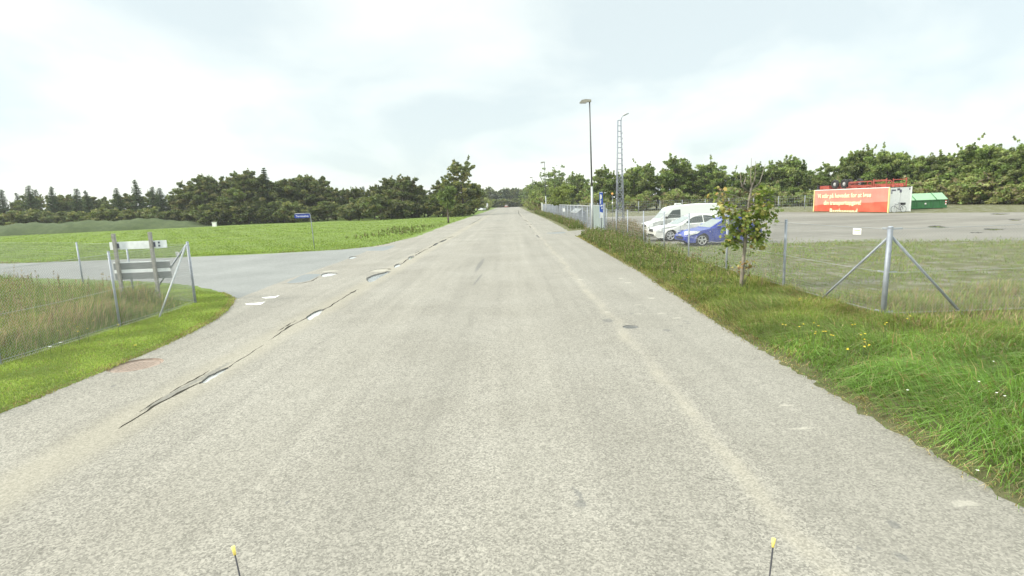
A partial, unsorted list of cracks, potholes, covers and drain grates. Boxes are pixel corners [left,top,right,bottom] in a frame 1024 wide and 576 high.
crack [118,370,210,429]
manhole cover [107,358,164,373]
crack [227,289,358,368]
pothole [199,368,229,384]
pothole [366,271,391,282]
